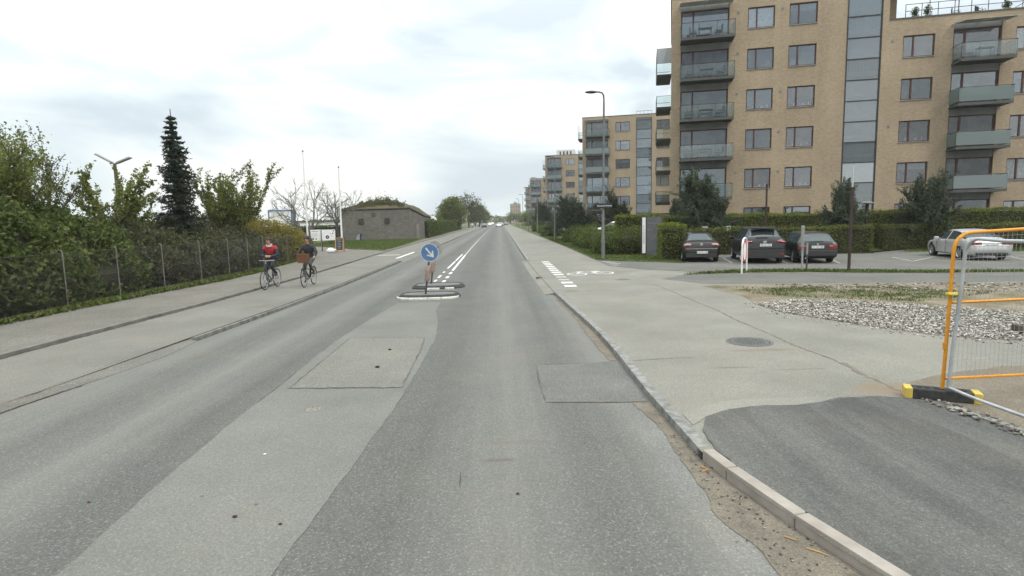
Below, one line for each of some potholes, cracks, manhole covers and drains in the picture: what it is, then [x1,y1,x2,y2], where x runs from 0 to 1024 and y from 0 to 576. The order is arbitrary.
manhole cover [726,337,774,347]
